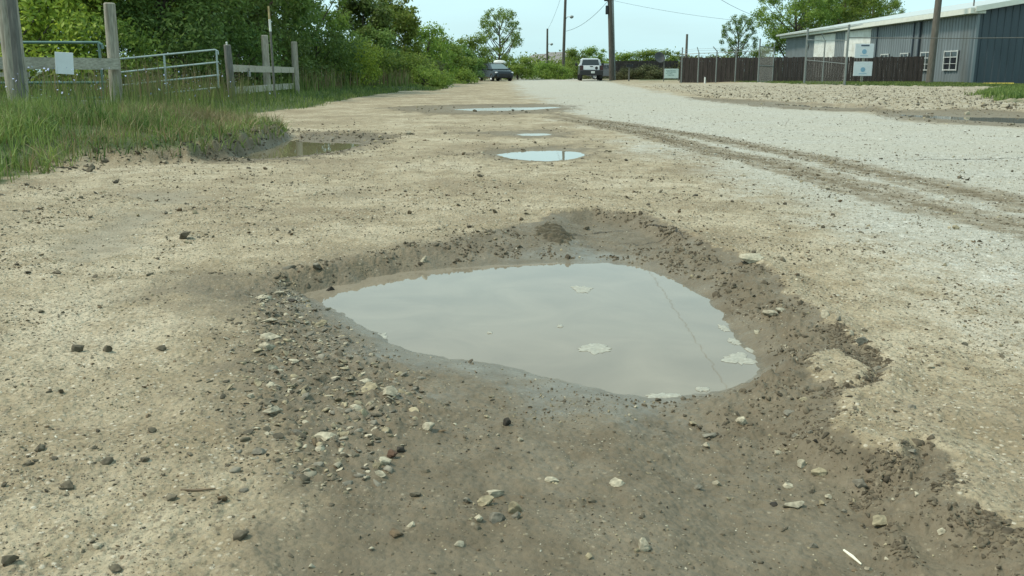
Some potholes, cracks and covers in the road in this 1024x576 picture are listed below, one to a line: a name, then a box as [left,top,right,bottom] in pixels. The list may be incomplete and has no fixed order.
pothole [198,131,403,163]
pothole [156,209,1024,576]
pothole [472,145,601,163]
pothole [454,129,571,138]
pothole [383,104,575,115]
